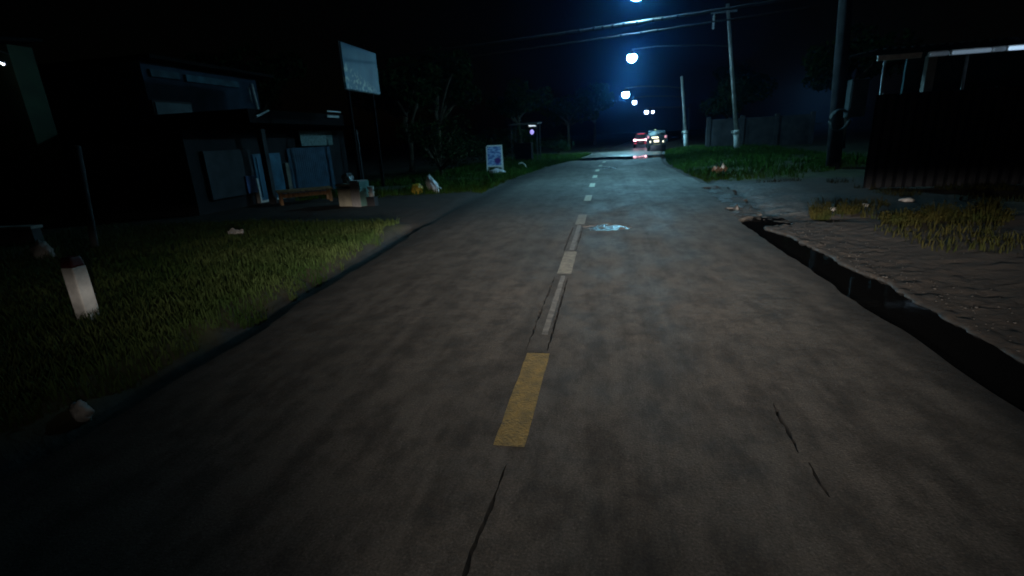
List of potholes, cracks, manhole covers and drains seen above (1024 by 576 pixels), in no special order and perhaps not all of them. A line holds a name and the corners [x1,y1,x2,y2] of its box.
crack [526,278,568,351]
crack [774,405,830,497]
